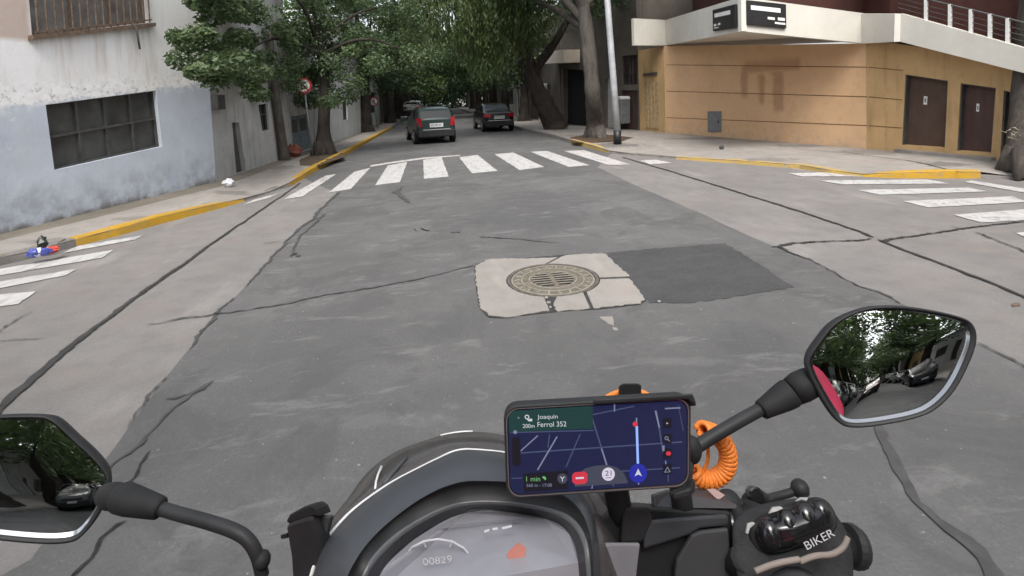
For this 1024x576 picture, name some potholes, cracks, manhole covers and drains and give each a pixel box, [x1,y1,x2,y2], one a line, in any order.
crack [773,221,1024,259]
manhole cover [507,264,599,297]
crack [150,192,474,324]
